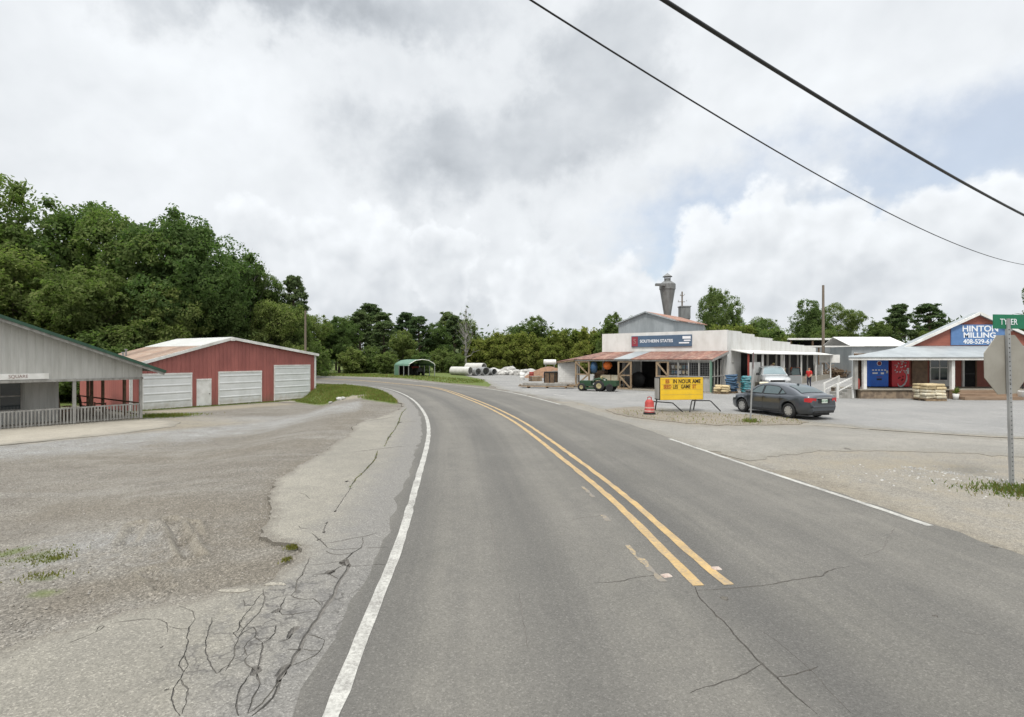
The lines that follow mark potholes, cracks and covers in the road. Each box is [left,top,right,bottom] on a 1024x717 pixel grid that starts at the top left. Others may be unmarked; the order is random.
crack [70,481,378,716]
crack [690,567,851,714]
